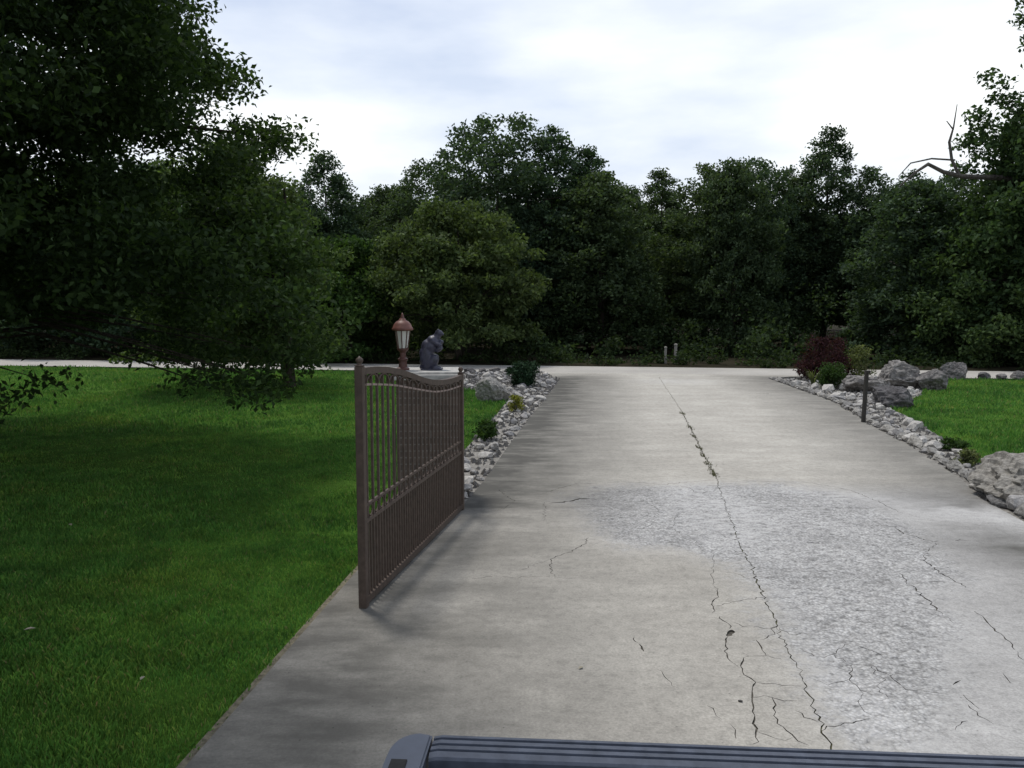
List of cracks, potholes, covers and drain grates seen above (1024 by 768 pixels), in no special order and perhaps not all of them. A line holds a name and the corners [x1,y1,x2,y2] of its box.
crack [499,480,989,746]
